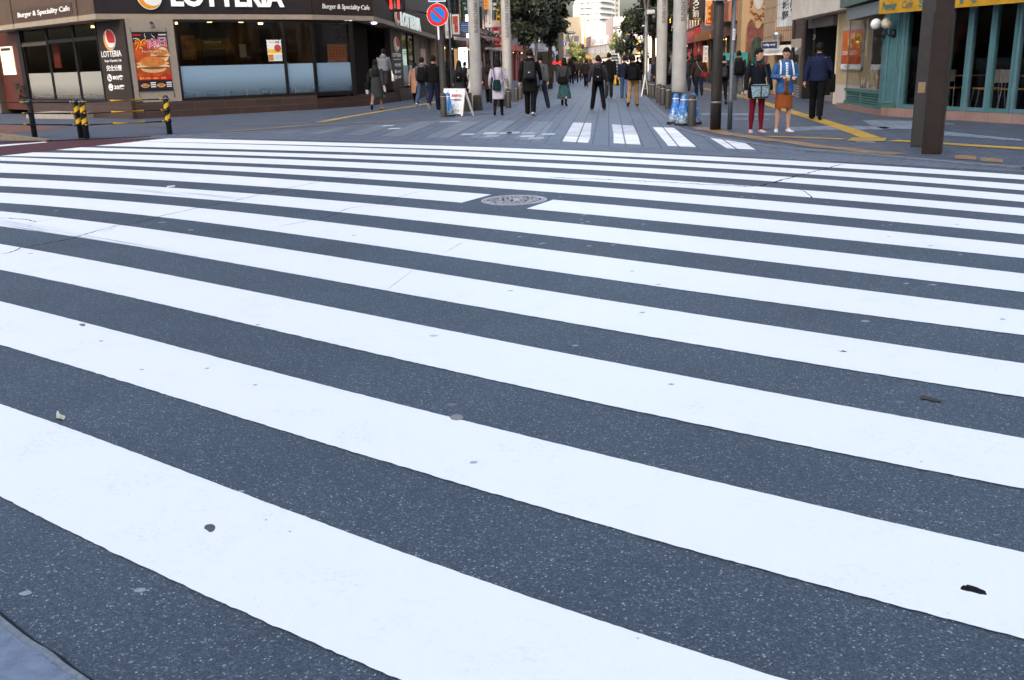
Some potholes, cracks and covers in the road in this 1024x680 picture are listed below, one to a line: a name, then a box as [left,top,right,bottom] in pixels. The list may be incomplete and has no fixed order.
manhole cover [481,195,547,206]
